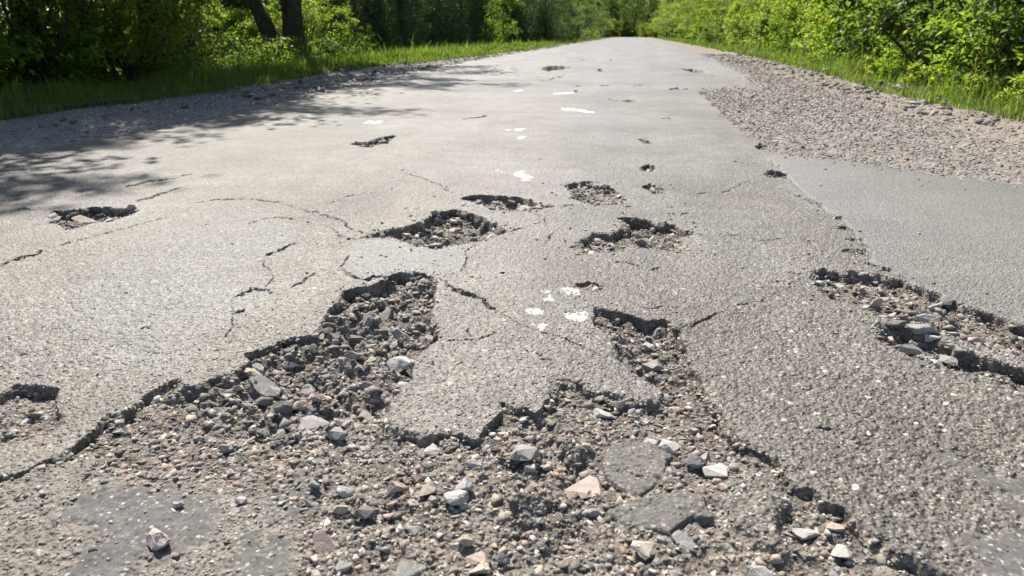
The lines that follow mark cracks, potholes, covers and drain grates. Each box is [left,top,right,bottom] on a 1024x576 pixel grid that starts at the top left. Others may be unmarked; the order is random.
pothole [47,206,140,230]
pothole [873,321,1024,398]
crack [2,249,44,266]
pothole [357,208,509,247]
pothole [460,194,552,212]
pothole [806,267,1024,359]
pothole [642,183,668,194]
pothole [763,169,787,178]
pothole [0,271,956,576]
pothole [547,216,696,256]
